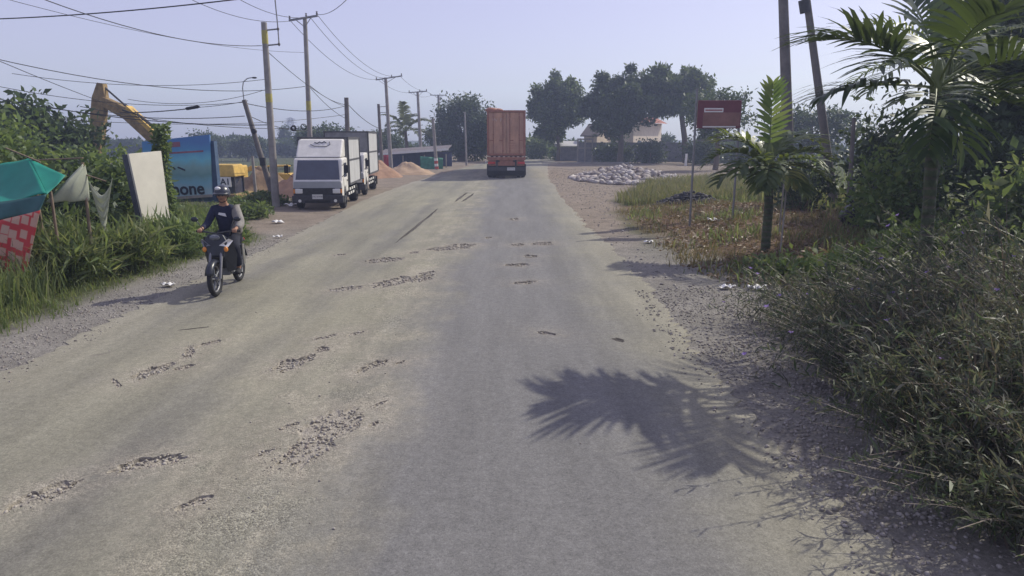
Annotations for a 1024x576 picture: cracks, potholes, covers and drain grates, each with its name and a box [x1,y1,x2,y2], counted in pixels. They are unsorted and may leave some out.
pothole [261,345,335,379]
pothole [351,359,405,374]
pothole [312,270,447,296]
pothole [332,253,410,268]
pothole [54,449,201,486]
pothole [409,243,477,254]
pothole [0,466,112,520]
pothole [140,384,388,549]
pothole [128,354,200,380]
